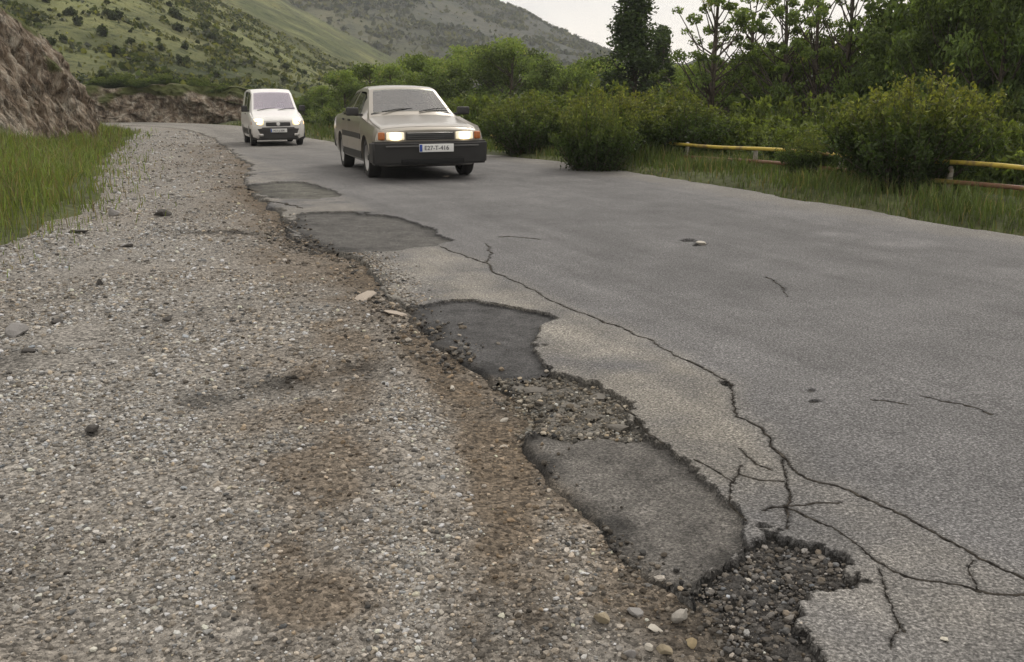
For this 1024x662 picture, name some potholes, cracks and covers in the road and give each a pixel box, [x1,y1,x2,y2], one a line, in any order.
pothole [496,374,647,444]
pothole [682,523,859,662]
crack [441,244,1024,650]
